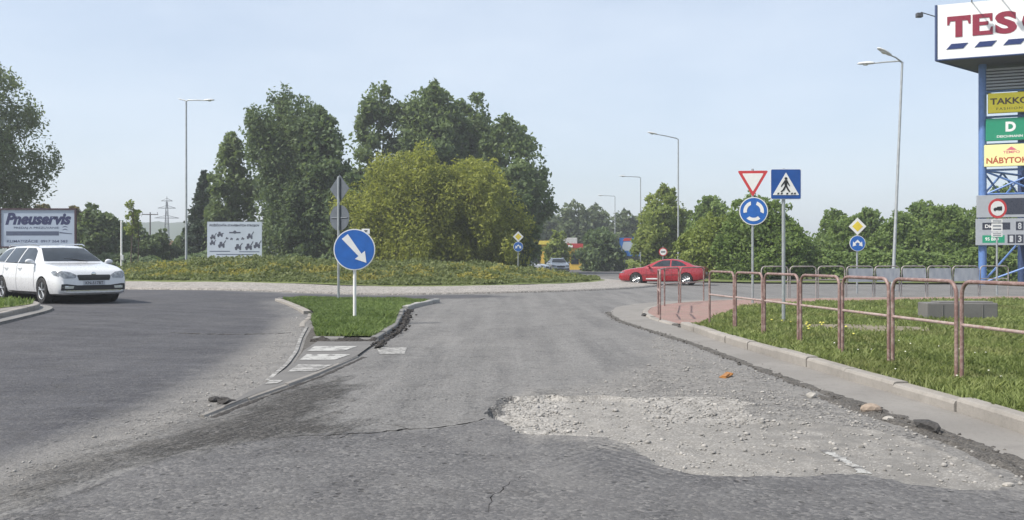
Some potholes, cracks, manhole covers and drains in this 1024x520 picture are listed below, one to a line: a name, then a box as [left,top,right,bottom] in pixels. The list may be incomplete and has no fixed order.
crack [266,418,484,441]
pothole [484,395,1005,491]
